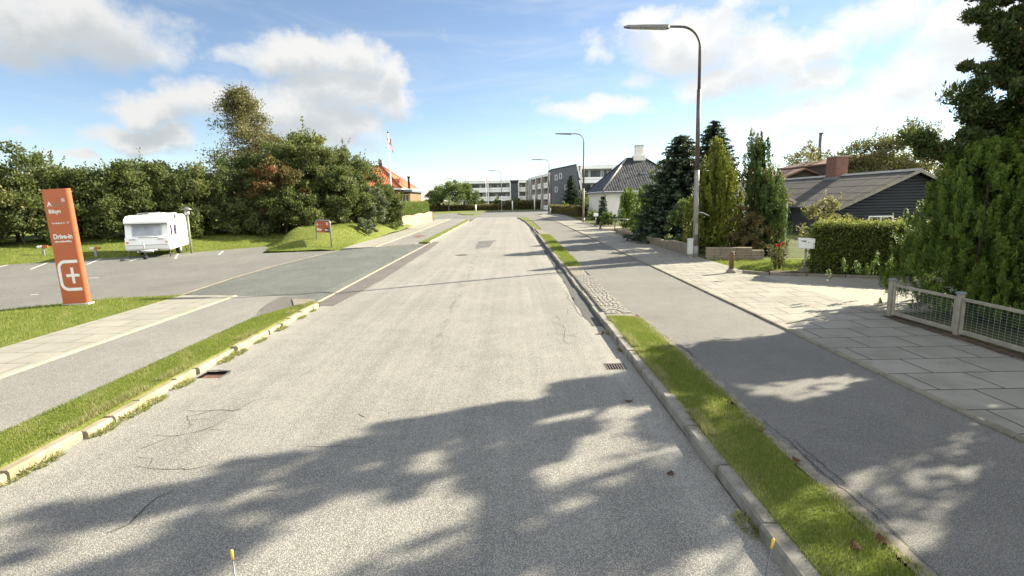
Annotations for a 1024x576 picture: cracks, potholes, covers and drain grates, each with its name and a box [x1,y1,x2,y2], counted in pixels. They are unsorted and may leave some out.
crack [143,398,262,448]
crack [108,490,173,533]
